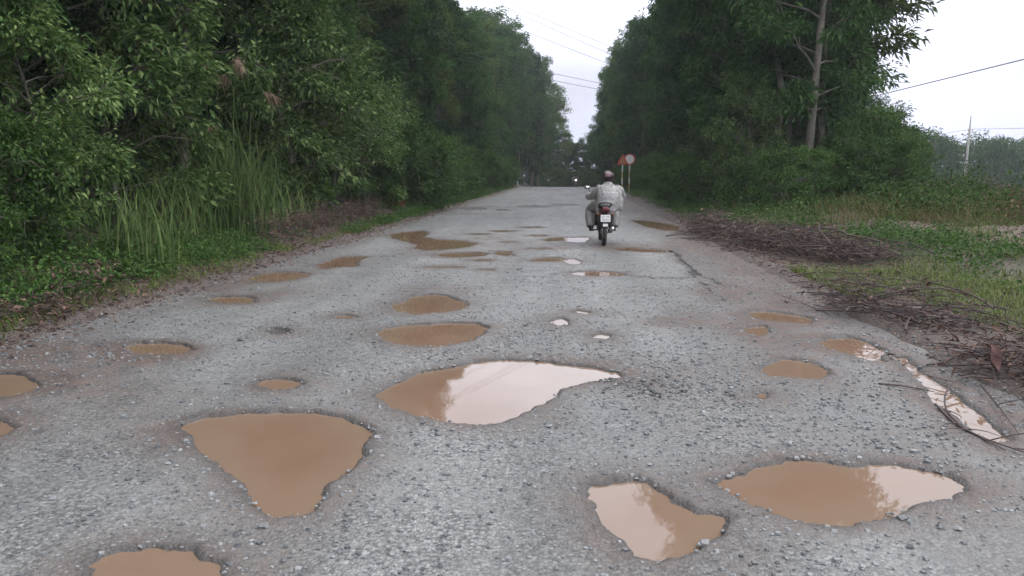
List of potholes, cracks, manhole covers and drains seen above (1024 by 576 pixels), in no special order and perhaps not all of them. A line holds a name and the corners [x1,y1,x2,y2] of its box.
pothole [195,294,269,306]
pothole [376,292,481,318]
pothole [793,333,905,366]
pothole [39,529,270,576]
pothole [681,448,1013,549]
pothole [104,338,215,359]
pothole [0,368,67,404]
pothole [152,403,399,535]
pothole [352,354,646,434]
pothole [358,319,506,351]
pothole [738,353,853,385]
pothole [558,467,762,576]
